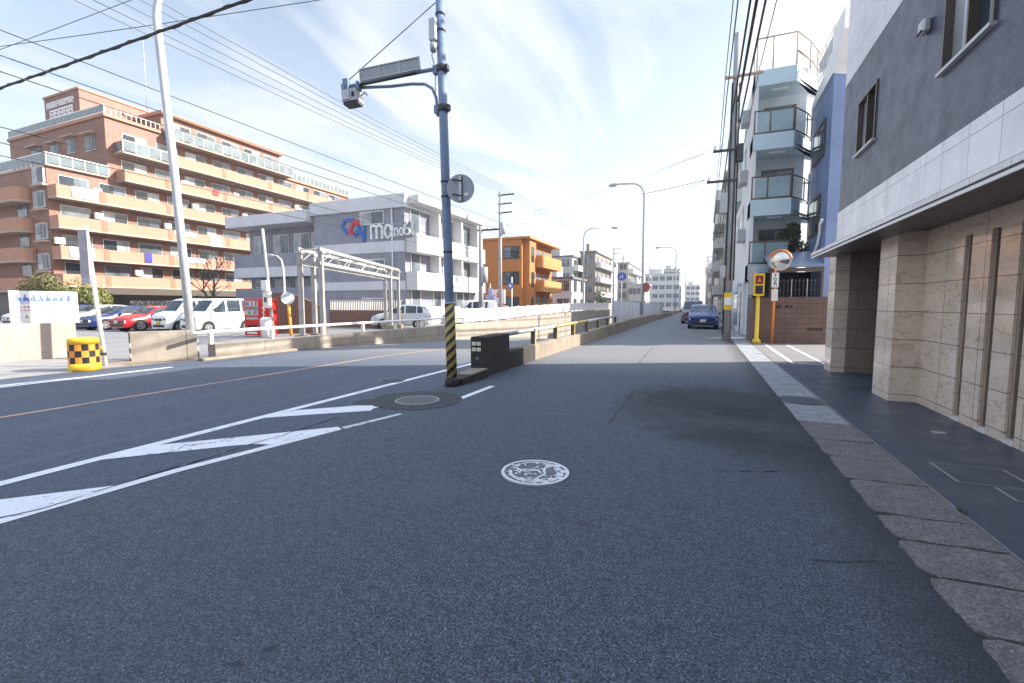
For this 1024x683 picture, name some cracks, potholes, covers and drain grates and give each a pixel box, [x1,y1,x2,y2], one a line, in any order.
utility cover [929,462,1024,489]
manhole cover [501,460,569,486]
manhole cover [395,395,439,405]
